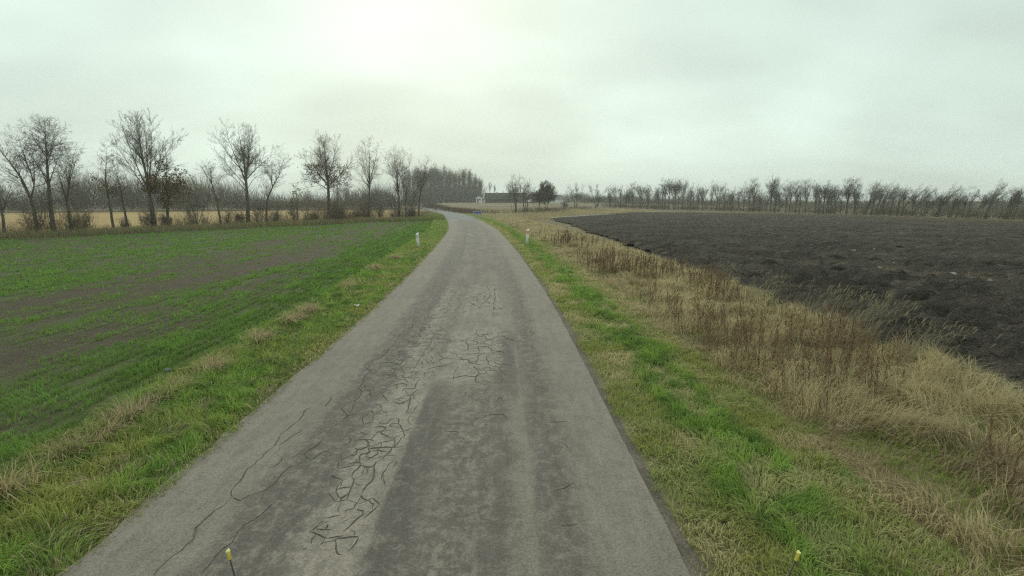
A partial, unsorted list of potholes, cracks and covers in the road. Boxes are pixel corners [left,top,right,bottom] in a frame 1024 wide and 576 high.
crack [154,285,502,574]
crack [433,330,525,407]
